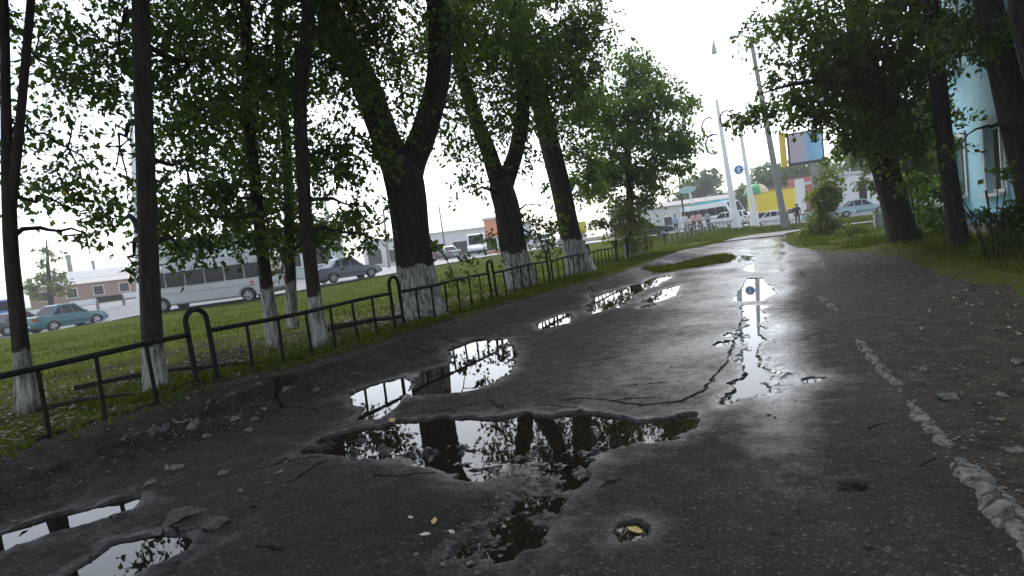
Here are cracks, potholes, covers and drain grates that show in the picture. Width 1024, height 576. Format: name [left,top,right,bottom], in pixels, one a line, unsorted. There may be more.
pothole [294,408,700,470]
pothole [638,284,681,303]
crack [272,375,320,412]
crack [252,455,328,484]
pothole [610,517,654,543]
pothole [0,494,146,551]
crack [532,318,745,409]
pothole [532,312,575,330]
pothole [345,375,424,421]
pothole [834,478,874,492]
pothole [406,338,521,397]
pothole [62,530,198,576]
